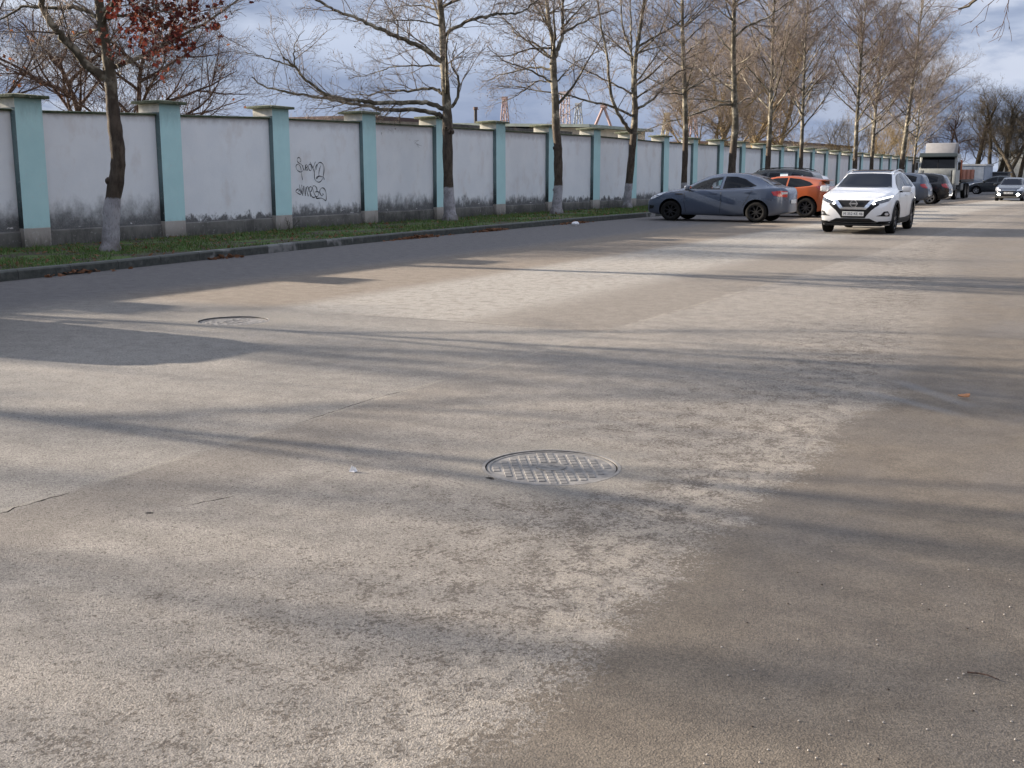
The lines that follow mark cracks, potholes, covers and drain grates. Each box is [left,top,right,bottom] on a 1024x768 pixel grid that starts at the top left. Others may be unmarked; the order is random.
manhole cover [196,316,270,325]
manhole cover [482,449,621,486]
